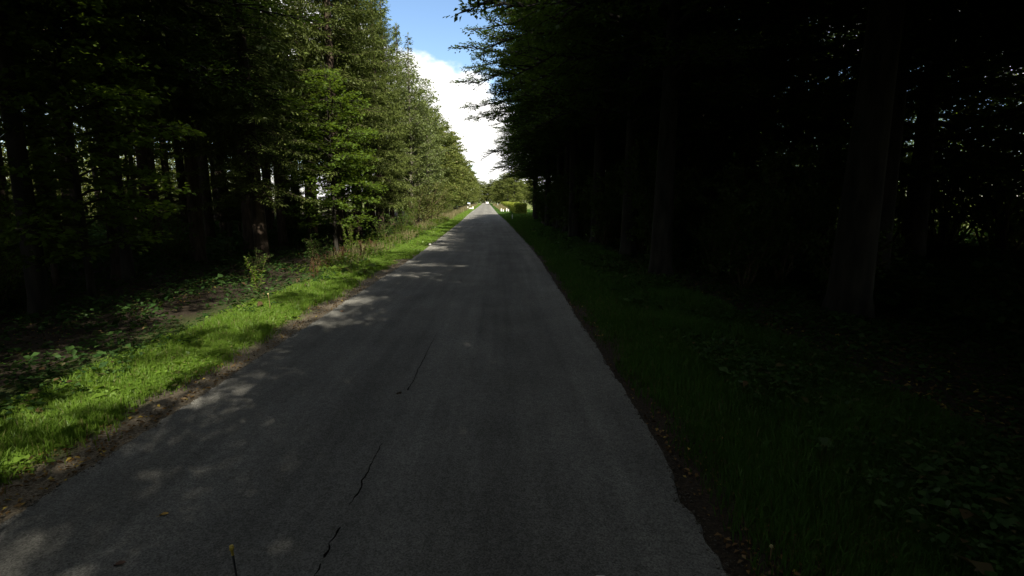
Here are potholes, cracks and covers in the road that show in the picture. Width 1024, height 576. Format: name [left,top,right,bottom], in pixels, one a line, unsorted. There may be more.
crack [349,443,383,505]
crack [314,526,341,576]
